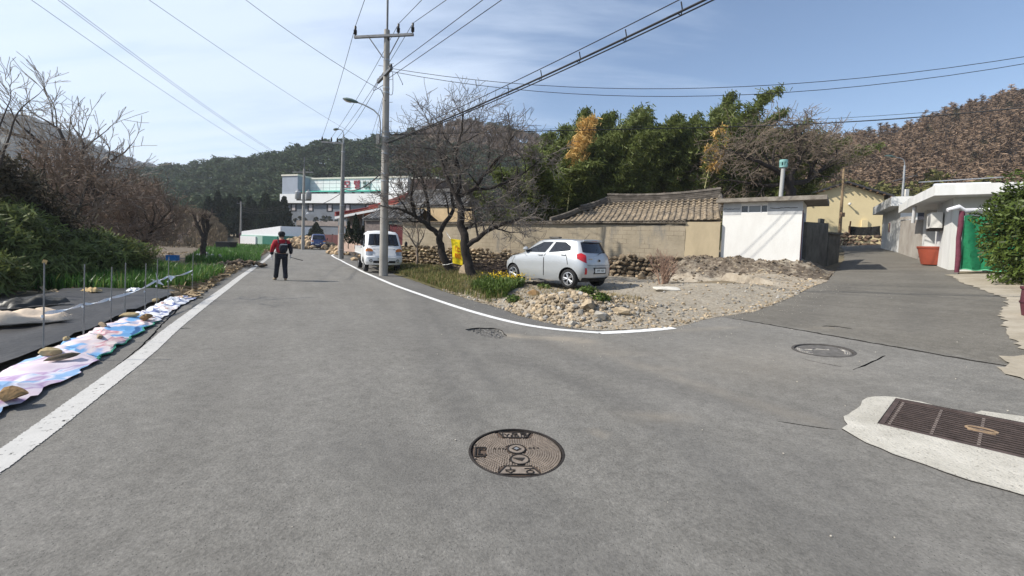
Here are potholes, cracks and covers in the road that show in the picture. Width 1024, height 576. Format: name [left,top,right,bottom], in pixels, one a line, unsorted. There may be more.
pothole [465,328,507,338]
drain grate [878,398,1024,458]
crack [802,356,884,370]
manhole cover [469,429,565,478]
manhole cover [791,343,857,357]
